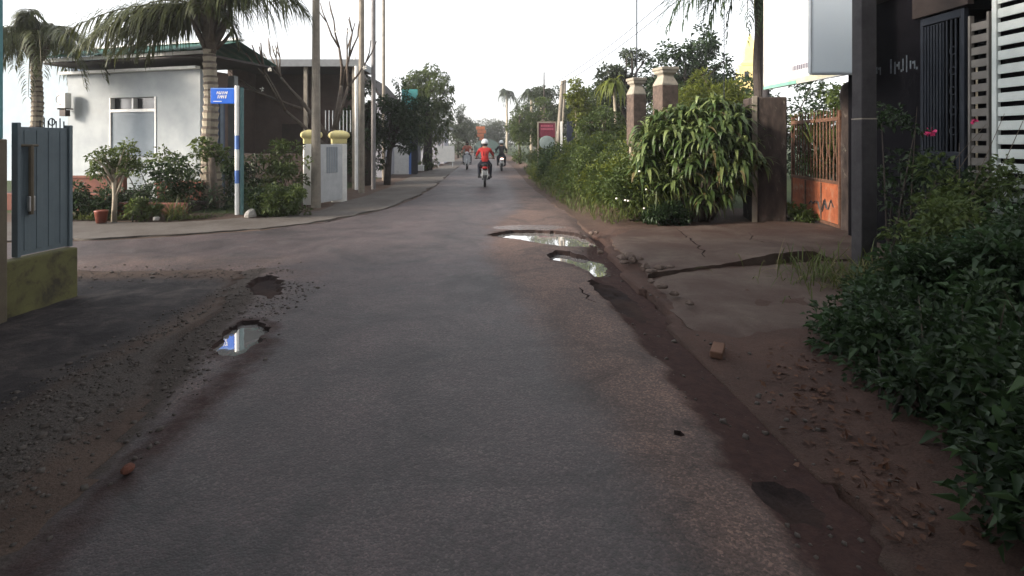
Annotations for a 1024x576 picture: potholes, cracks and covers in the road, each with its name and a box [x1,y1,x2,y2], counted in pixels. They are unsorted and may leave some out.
pothole [546,250,607,278]
pothole [751,482,826,529]
pothole [210,320,271,356]
pothole [488,230,596,247]
pothole [245,275,286,299]
